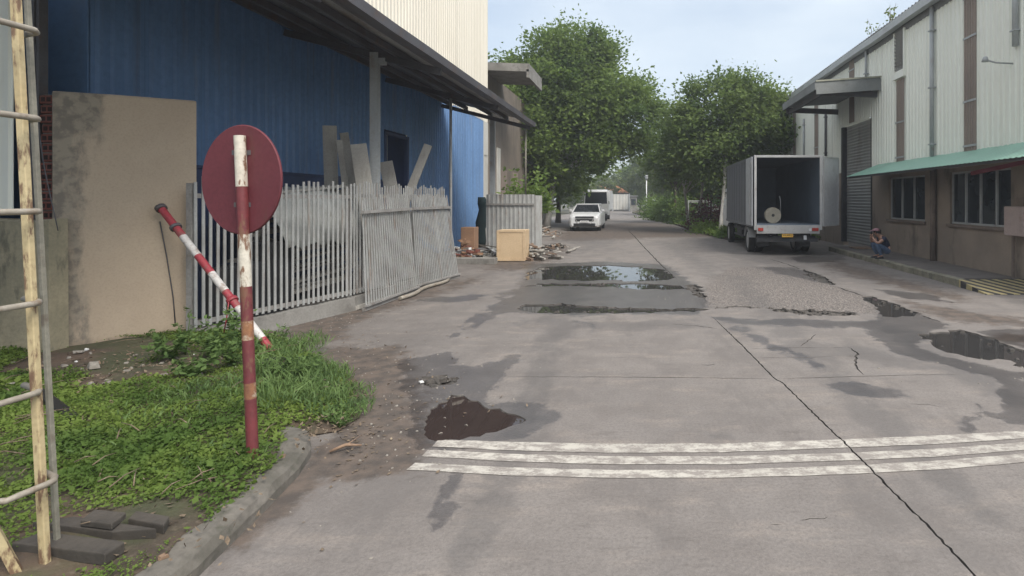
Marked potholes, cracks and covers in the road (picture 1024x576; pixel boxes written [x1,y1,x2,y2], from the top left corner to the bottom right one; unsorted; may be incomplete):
pothole [918,329,1024,366]
pothole [525,265,675,281]
pothole [423,395,526,434]
crack [755,334,864,375]
pothole [518,303,709,314]
